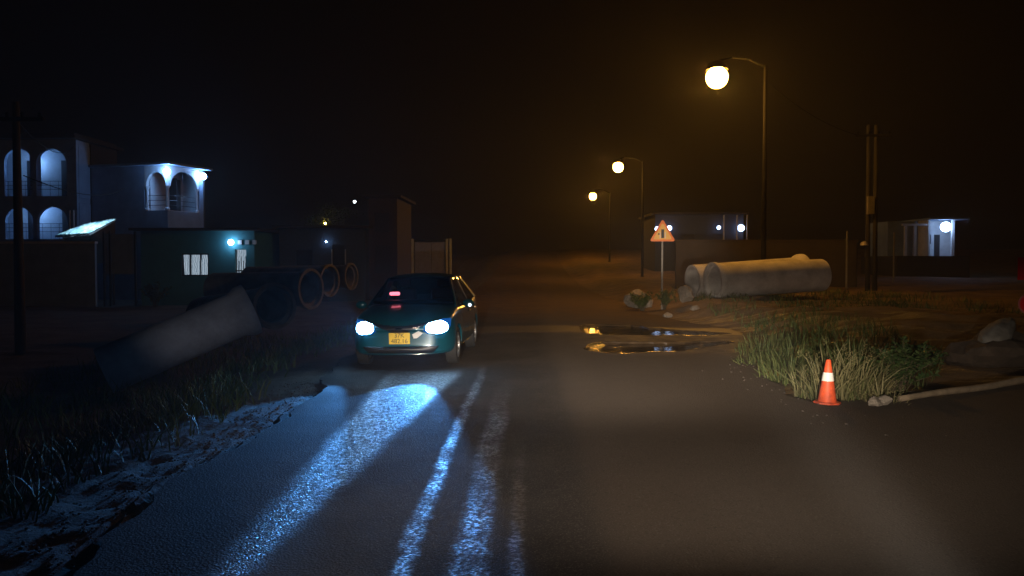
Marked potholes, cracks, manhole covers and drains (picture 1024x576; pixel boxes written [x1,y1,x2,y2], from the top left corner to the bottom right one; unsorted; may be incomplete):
pothole [579,324,732,336]
pothole [583,340,734,354]
